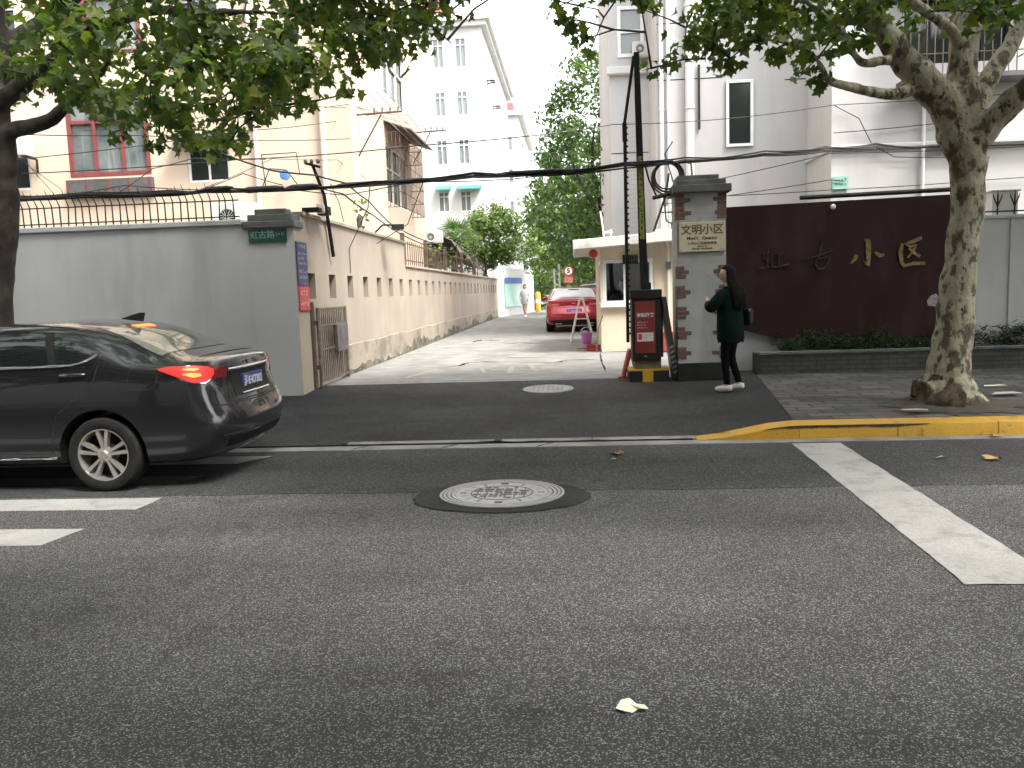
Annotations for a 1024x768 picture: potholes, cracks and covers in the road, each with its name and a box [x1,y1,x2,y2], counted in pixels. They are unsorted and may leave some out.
manhole cover [440,479,564,508]
manhole cover [523,384,574,393]
